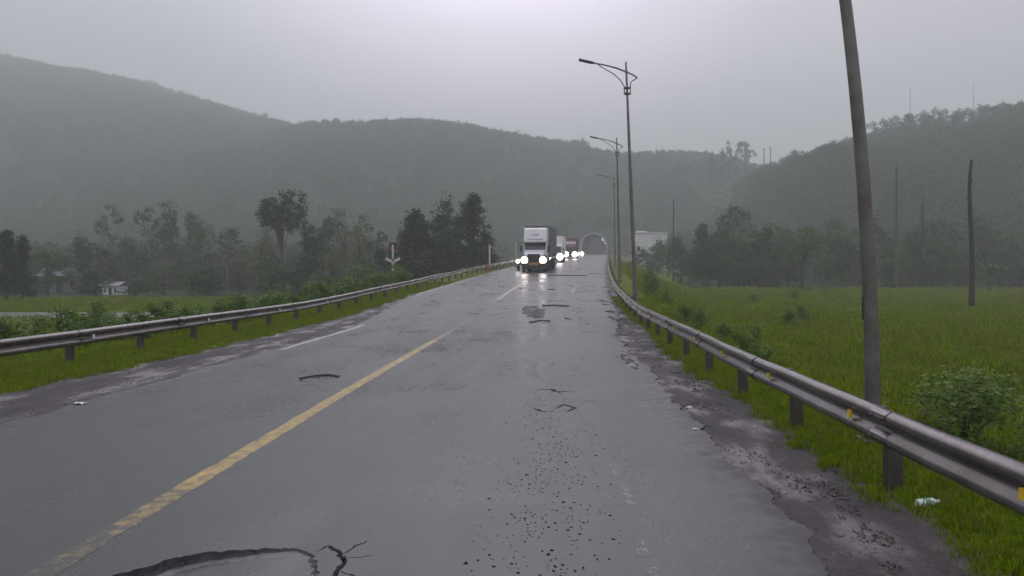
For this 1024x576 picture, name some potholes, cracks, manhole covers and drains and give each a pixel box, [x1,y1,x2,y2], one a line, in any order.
crack [534,389,577,412]
crack [316,541,373,576]
pothole [522,306,546,319]
pothole [112,548,321,576]
